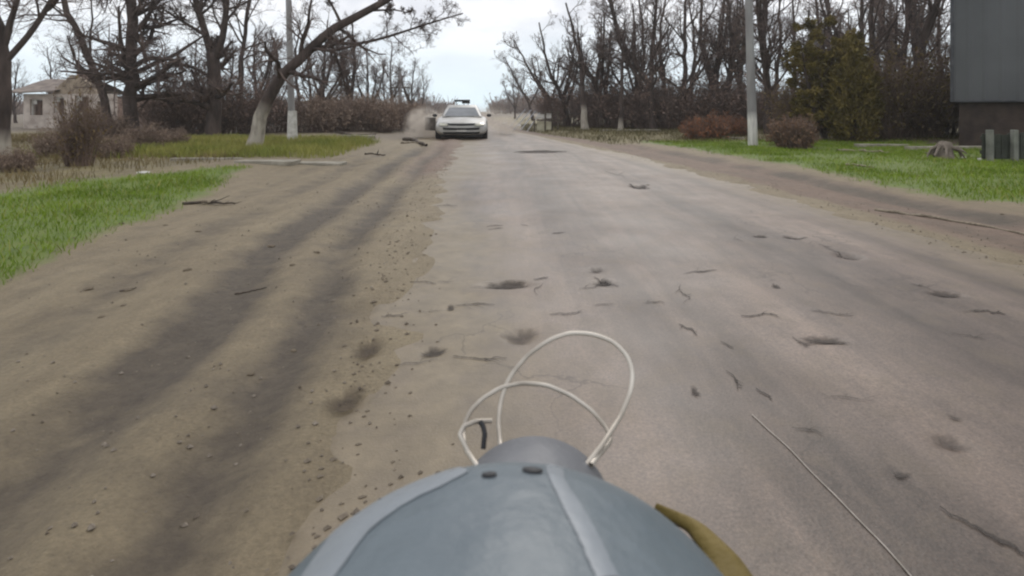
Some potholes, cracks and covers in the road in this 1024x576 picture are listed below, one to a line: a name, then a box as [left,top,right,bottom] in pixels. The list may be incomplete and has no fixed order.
crack [645,269,715,303]
crack [726,370,772,399]
pothole [485,281,524,289]
crack [940,506,1024,554]
